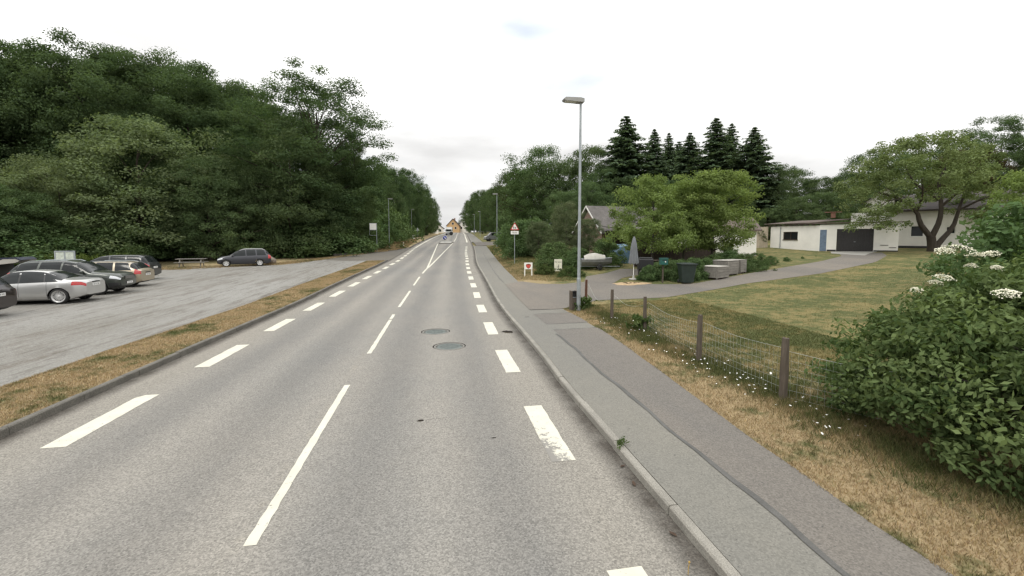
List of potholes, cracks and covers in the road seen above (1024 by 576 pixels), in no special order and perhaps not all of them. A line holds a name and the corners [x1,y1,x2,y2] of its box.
manhole cover [433,342,466,350]
